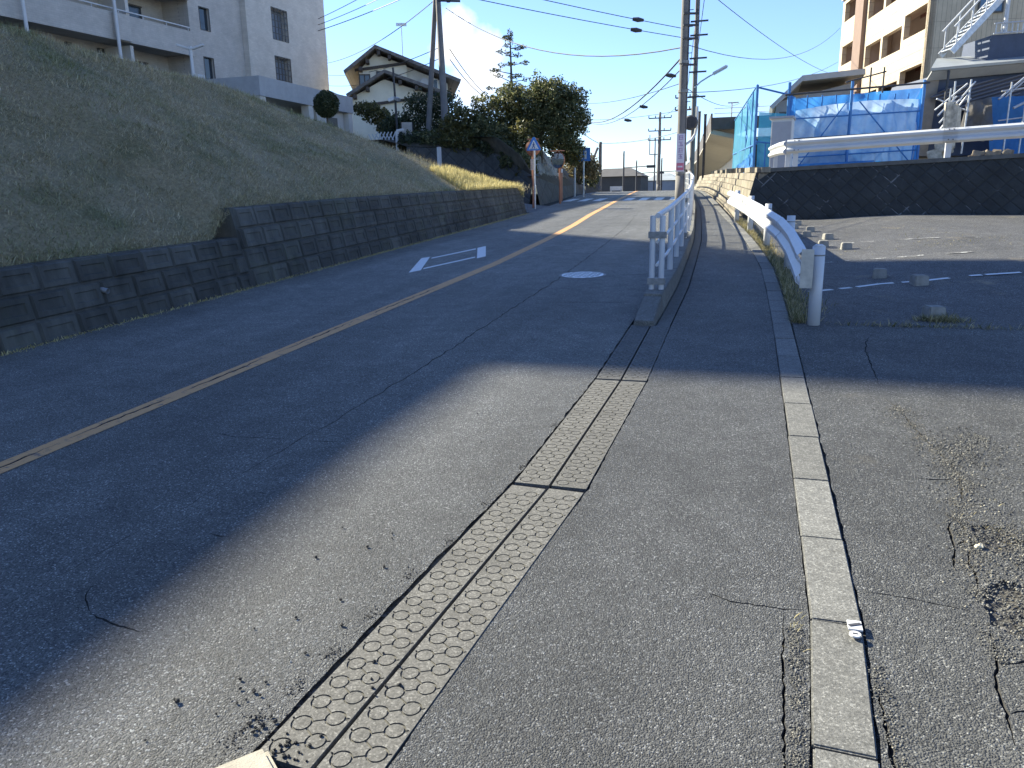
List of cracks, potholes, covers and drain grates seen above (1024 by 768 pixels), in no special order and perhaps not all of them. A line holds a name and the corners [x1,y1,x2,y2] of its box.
crack [85,584,141,632]
pothole [983,580,1024,636]
manhole cover [559,271,606,279]
crack [703,399,1024,768]
